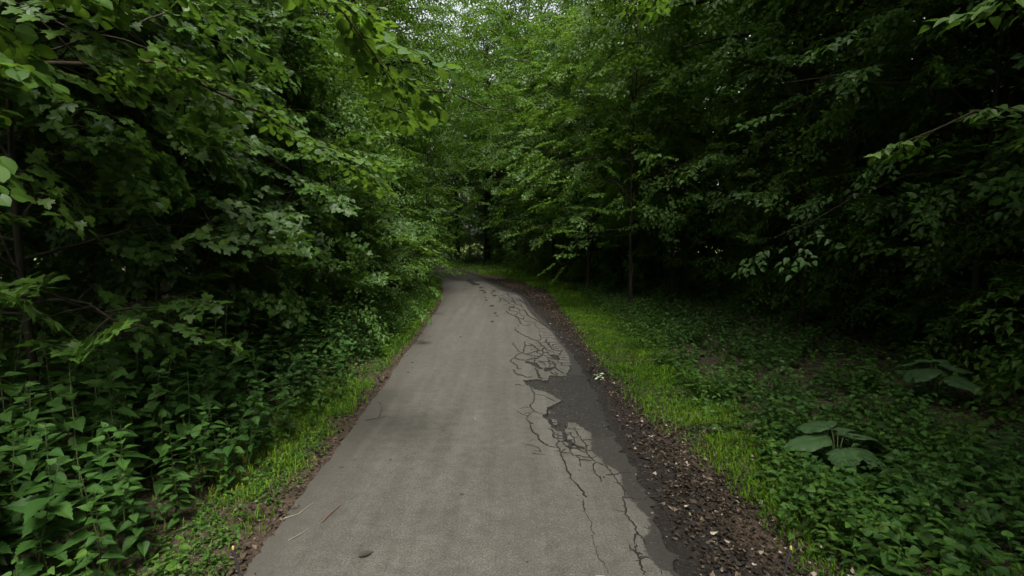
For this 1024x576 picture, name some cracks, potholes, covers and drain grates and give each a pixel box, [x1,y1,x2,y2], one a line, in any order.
crack [492,289,662,576]
